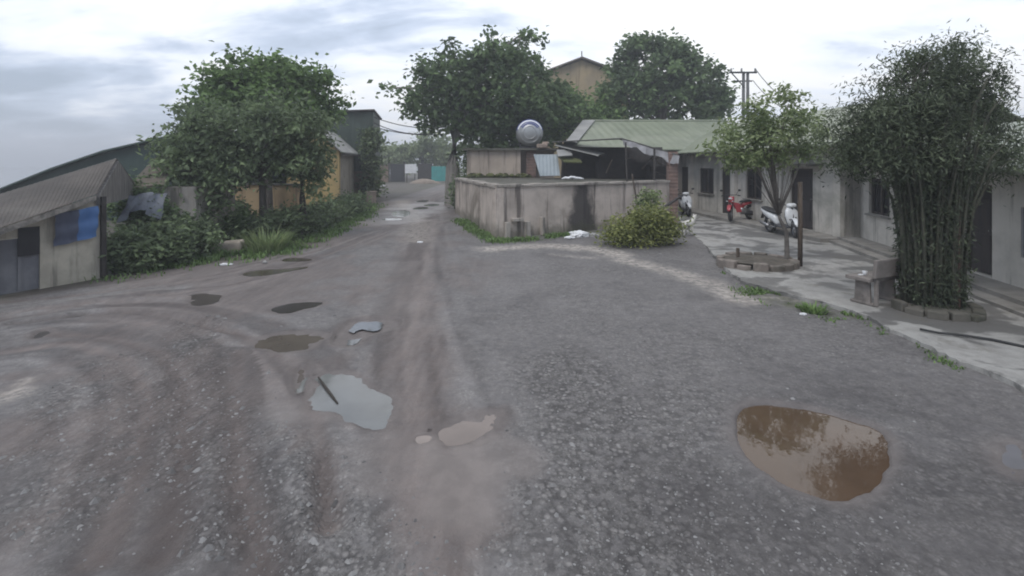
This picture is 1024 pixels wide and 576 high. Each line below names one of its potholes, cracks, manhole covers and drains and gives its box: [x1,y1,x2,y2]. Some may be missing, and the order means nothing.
pothole [228,263,321,280]
pothole [286,366,412,440]
pothole [717,395,913,516]
pothole [257,297,336,317]
pothole [424,403,520,456]
pothole [174,289,235,310]
pothole [235,328,337,357]
